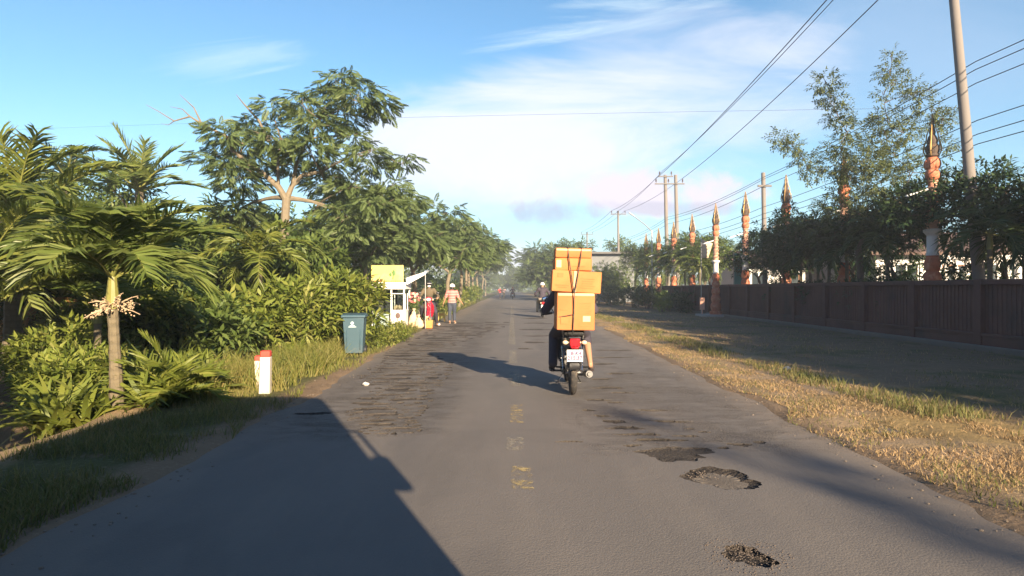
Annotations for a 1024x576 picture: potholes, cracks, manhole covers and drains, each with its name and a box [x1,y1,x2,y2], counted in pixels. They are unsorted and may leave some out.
pothole [679,466,762,490]
pothole [632,446,715,462]
crack [557,350,766,449]
crack [295,318,551,435]
pothole [704,538,795,576]
